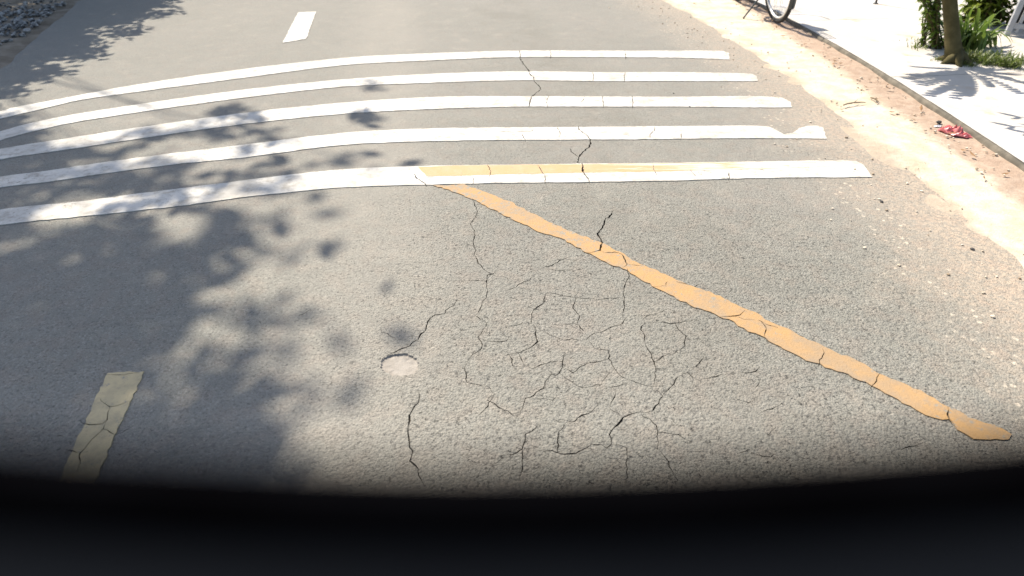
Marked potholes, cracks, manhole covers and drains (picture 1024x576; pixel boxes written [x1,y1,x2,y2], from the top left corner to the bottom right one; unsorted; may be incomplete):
crack [464,256,703,463]
crack [597,211,627,264]
crack [407,395,420,462]
crack [570,126,592,184]
crack [383,300,457,358]
